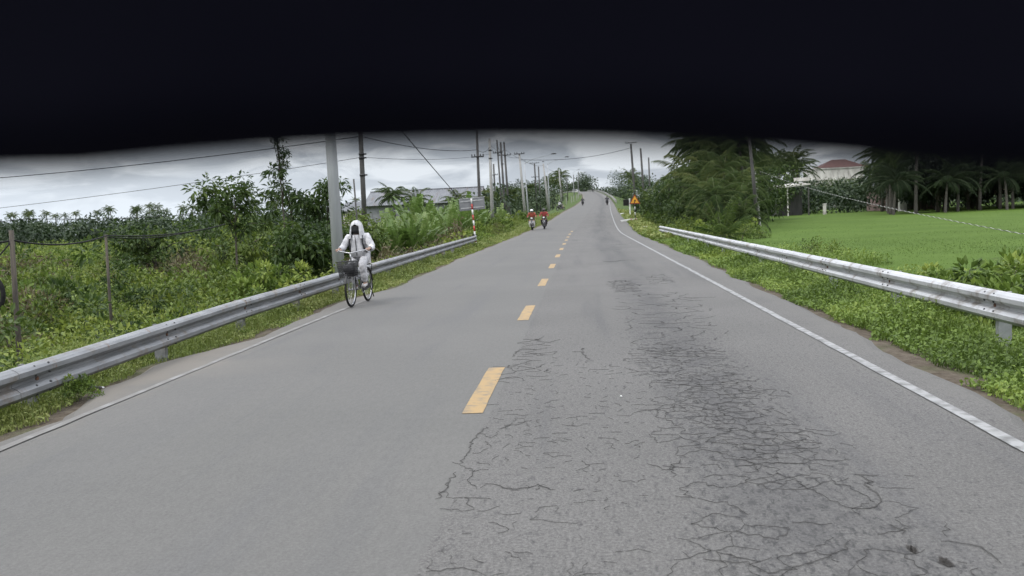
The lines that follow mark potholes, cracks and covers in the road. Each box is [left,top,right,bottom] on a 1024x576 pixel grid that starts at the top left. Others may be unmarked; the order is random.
pothole [938,556,955,567]
crack [427,338,690,576]
crack [609,274,1001,576]
